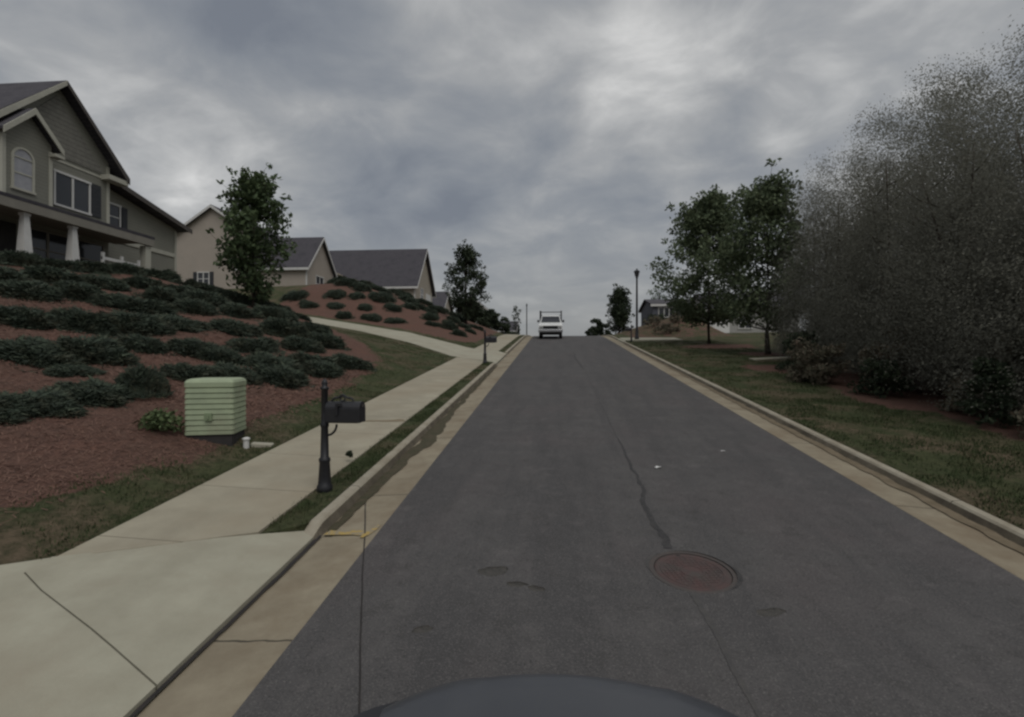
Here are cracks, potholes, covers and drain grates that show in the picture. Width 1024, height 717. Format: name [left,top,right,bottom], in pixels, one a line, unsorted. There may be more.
manhole cover [649,551,738,593]
